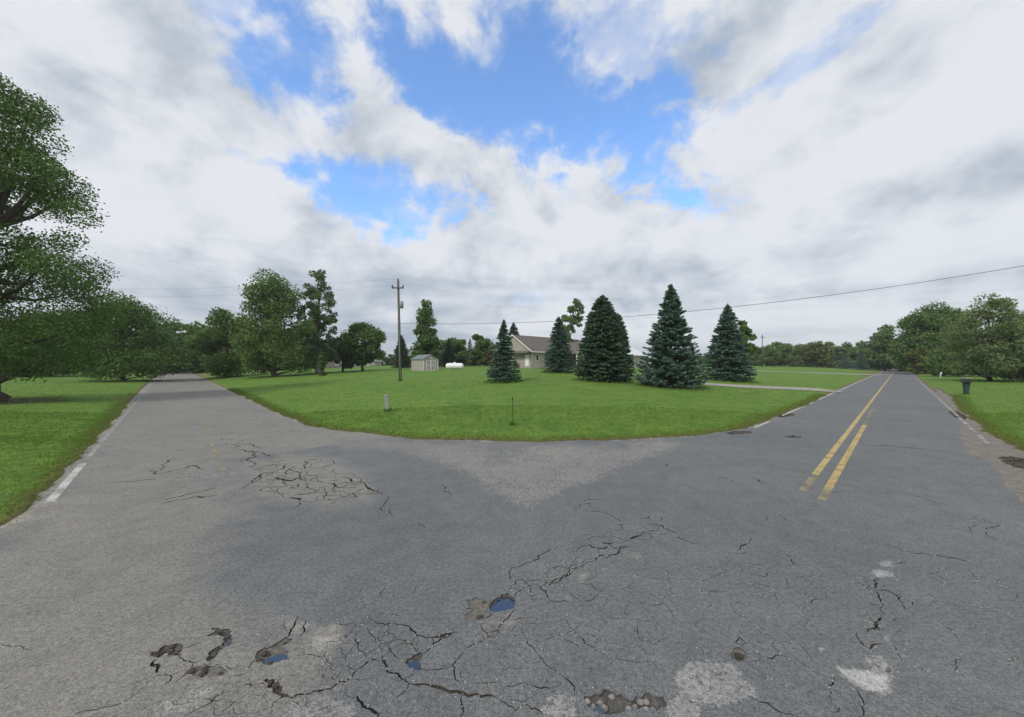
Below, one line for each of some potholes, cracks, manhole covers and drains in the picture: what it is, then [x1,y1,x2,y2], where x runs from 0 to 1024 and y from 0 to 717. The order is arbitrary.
pothole [186,664,227,678]
crack [114,459,215,504]
pothole [489,593,516,612]
pothole [405,652,423,671]
pothole [206,628,233,661]
crack [222,438,425,527]
pothole [731,647,748,662]
crack [837,546,1024,717]
pothole [255,637,292,665]
pothole [999,456,1024,469]
pothole [264,678,289,698]
crack [68,515,841,717]
